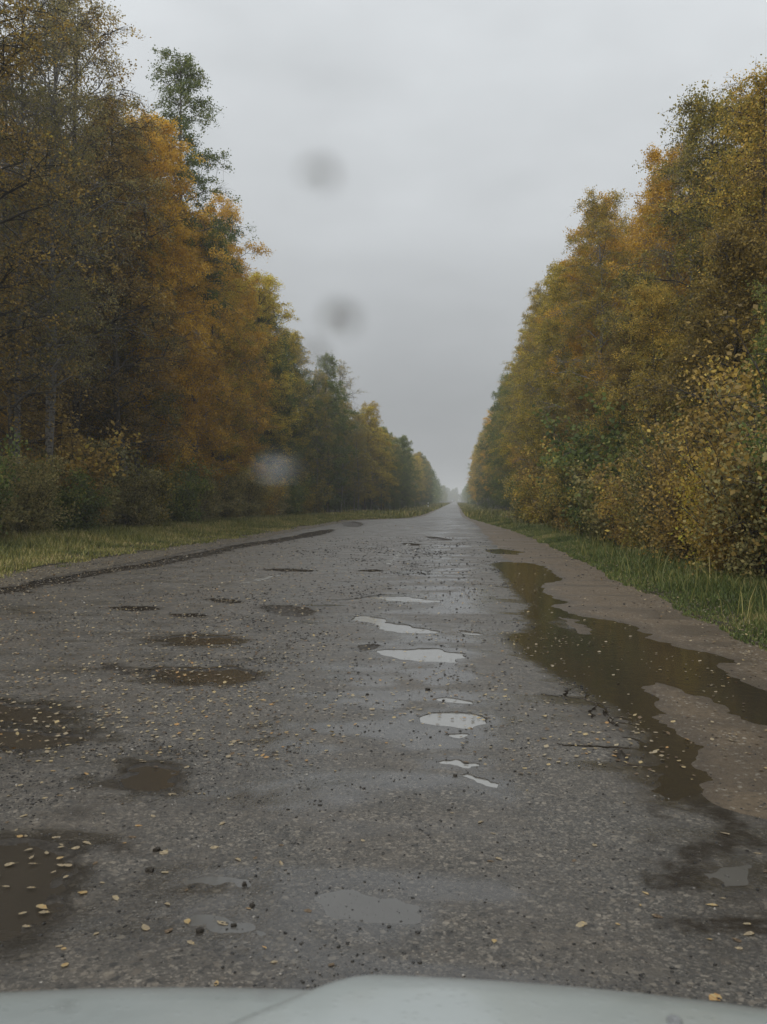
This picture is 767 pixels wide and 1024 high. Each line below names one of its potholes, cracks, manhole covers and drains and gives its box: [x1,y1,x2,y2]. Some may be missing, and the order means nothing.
pothole [118,762,182,791]
pothole [147,667,258,684]
pothole [0,838,78,942]
pothole [0,728,94,749]
crack [541,688,642,766]
pothole [462,773,499,788]
pothole [419,711,487,729]
pothole [376,648,466,663]
pothole [157,635,238,645]
pothole [0,700,74,725]
pothole [351,615,440,633]
